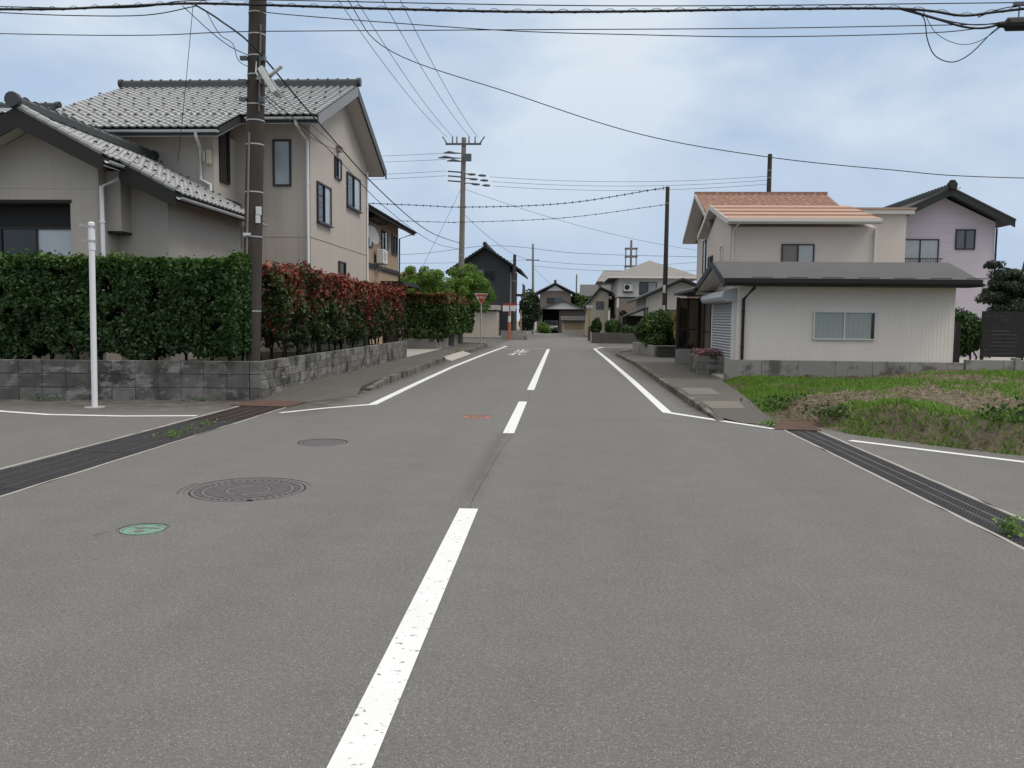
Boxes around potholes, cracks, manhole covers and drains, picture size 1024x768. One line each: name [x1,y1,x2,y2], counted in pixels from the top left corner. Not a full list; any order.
manhole cover [183,478,311,503]
manhole cover [115,523,170,536]
